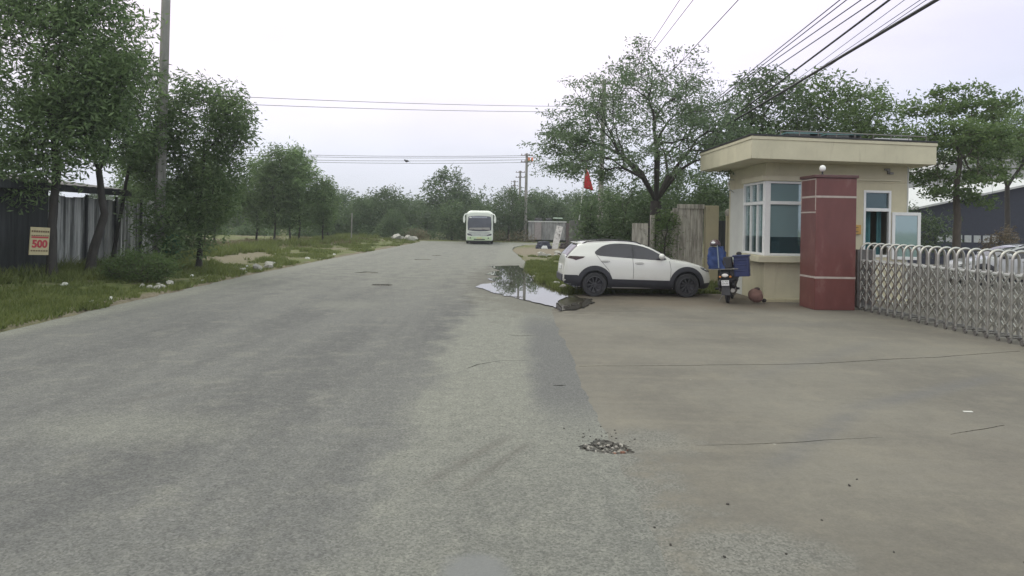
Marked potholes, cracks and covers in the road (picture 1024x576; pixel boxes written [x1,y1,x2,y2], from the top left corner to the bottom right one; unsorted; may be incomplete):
pothole [563,425,648,454]
